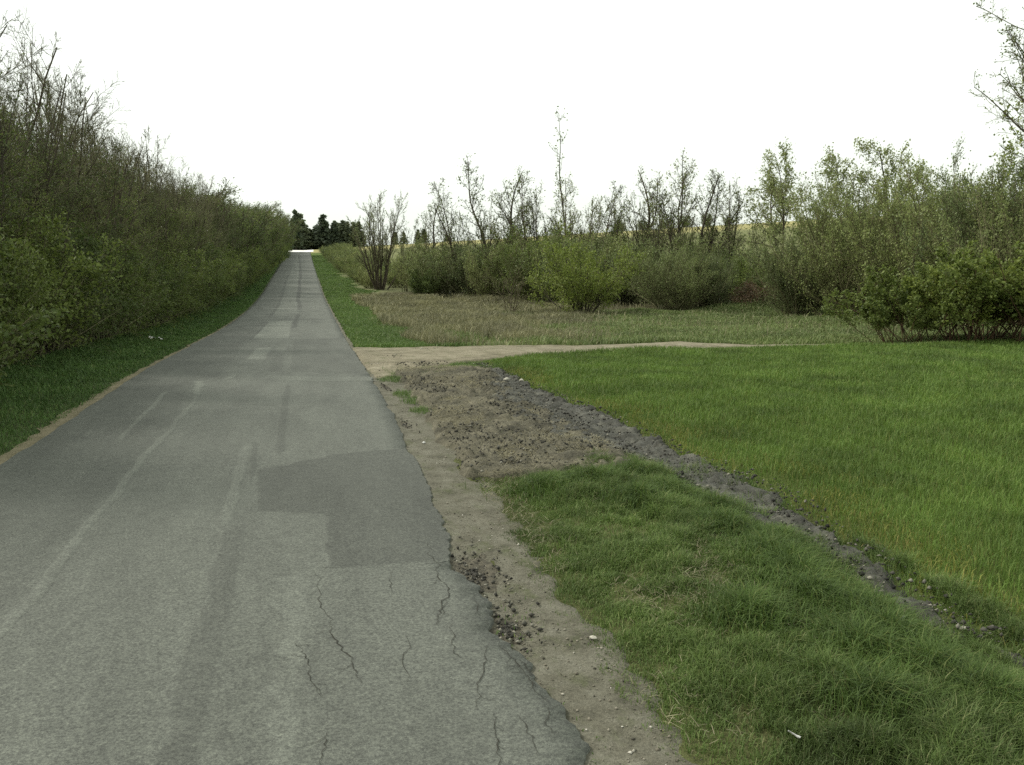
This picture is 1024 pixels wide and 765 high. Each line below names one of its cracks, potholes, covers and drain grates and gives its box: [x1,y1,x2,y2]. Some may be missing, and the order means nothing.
crack [294,574,362,696]
crack [427,542,462,658]
crack [476,641,558,765]
